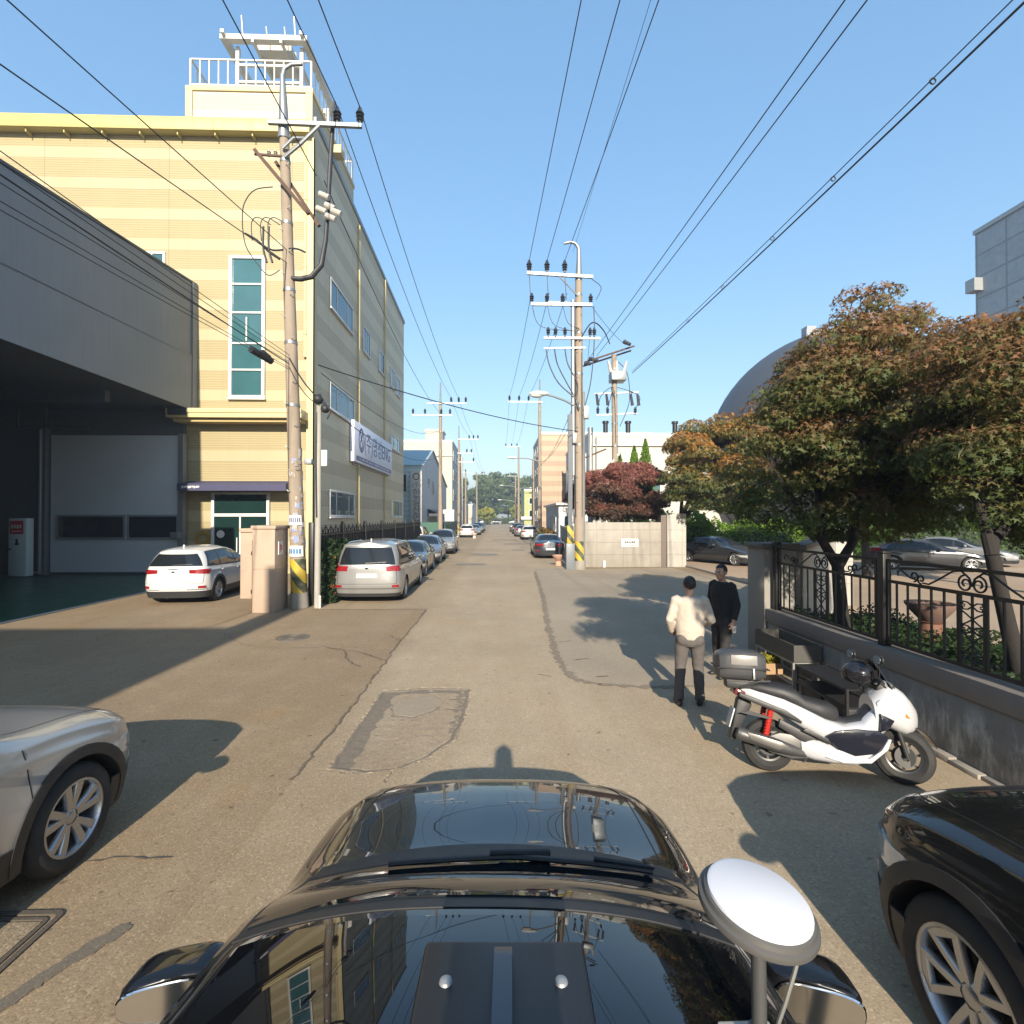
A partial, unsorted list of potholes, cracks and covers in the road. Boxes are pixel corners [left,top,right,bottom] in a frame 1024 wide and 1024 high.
manhole cover [0,910,63,974]
